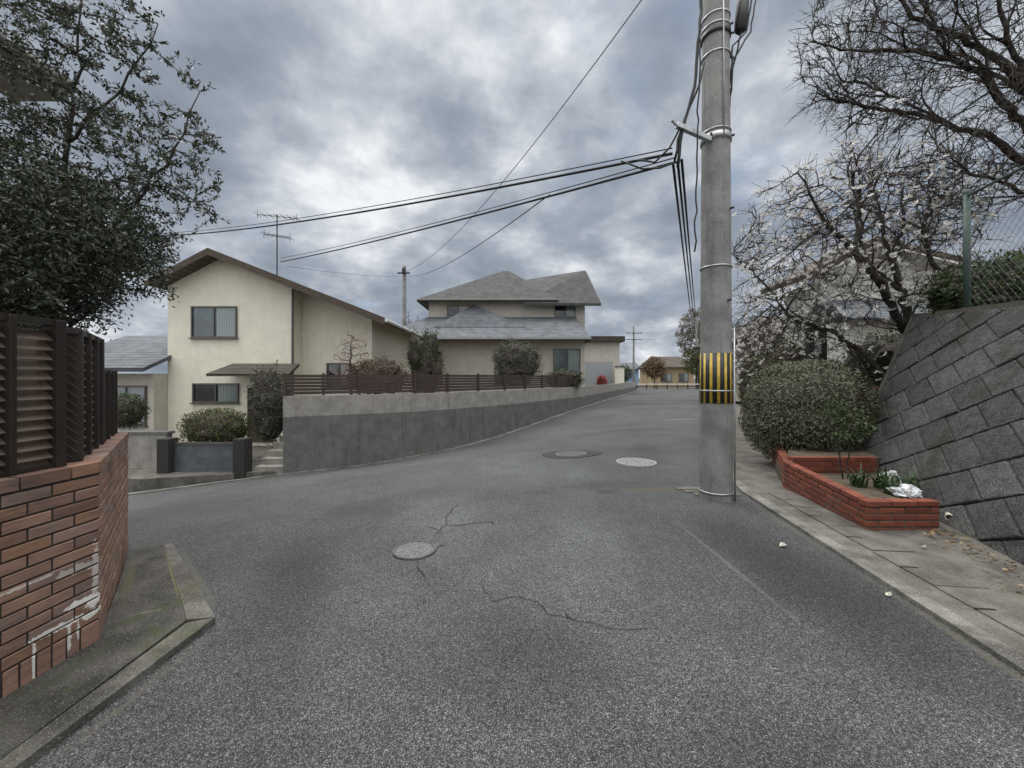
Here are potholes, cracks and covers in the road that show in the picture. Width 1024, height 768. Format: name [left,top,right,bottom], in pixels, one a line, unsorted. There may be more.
crack [429,504,494,548]
manhole cover [392,541,436,561]
crack [480,581,646,630]
manhole cover [542,450,602,459]
manhole cover [616,458,657,467]
